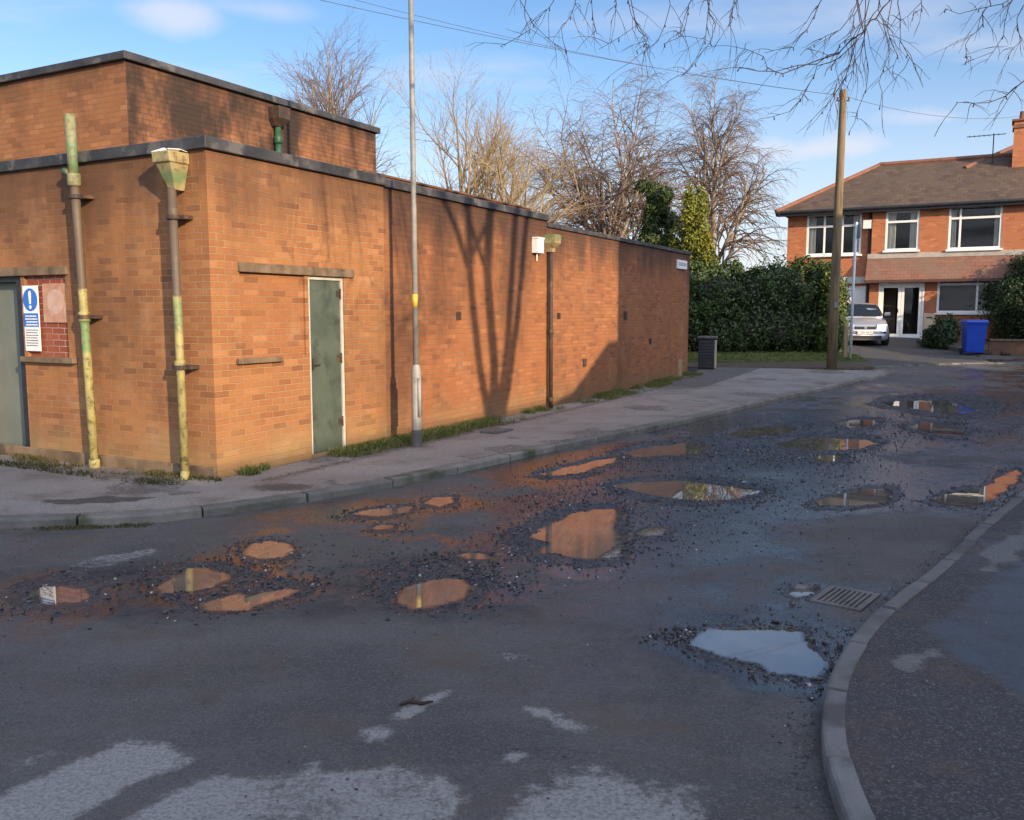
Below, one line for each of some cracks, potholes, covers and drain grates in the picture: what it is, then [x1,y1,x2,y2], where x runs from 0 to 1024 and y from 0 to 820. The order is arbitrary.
drain grate [809,584,880,612]
pothole [527,455,626,480]
pothole [137,560,321,616]
pothole [4,573,117,611]
pothole [599,475,772,507]
pothole [916,465,1024,509]
pothole [344,503,421,521]
pothole [902,418,977,439]
pothole [501,503,637,569]
pothole [681,624,835,686]
pothole [608,439,720,461]
pothole [370,561,495,615]
